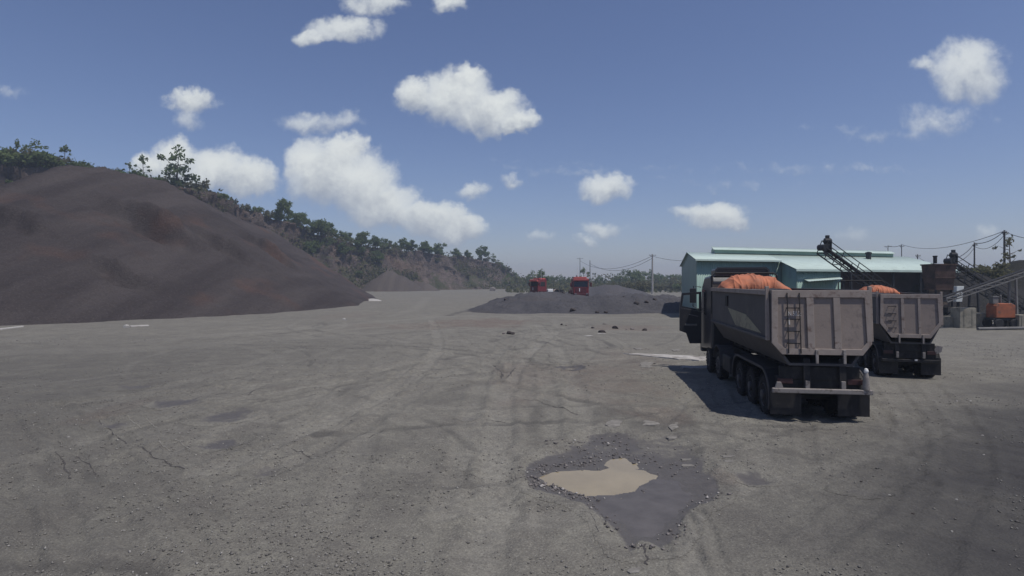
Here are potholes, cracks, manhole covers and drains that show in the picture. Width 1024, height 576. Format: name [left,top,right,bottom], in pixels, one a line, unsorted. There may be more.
pothole [507,426,740,563]
crack [56,453,96,479]
